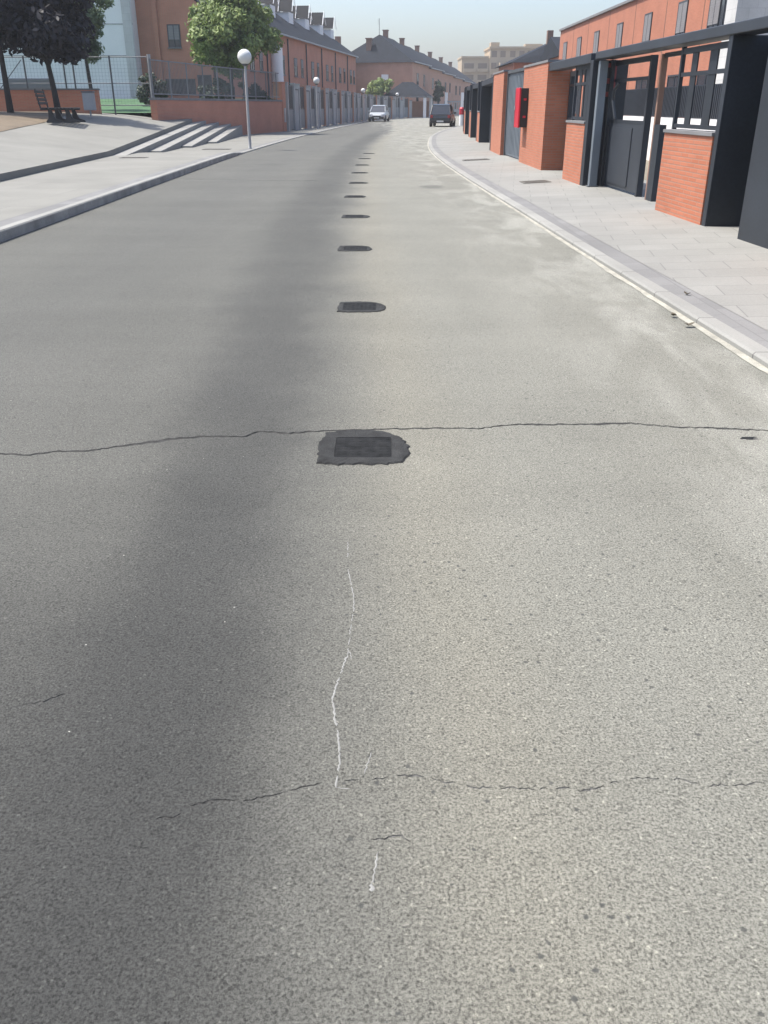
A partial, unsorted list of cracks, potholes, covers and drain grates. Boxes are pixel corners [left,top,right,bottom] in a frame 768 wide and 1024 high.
crack [160,535,764,819]
crack [0,423,768,456]
manhole cover [337,301,386,313]
